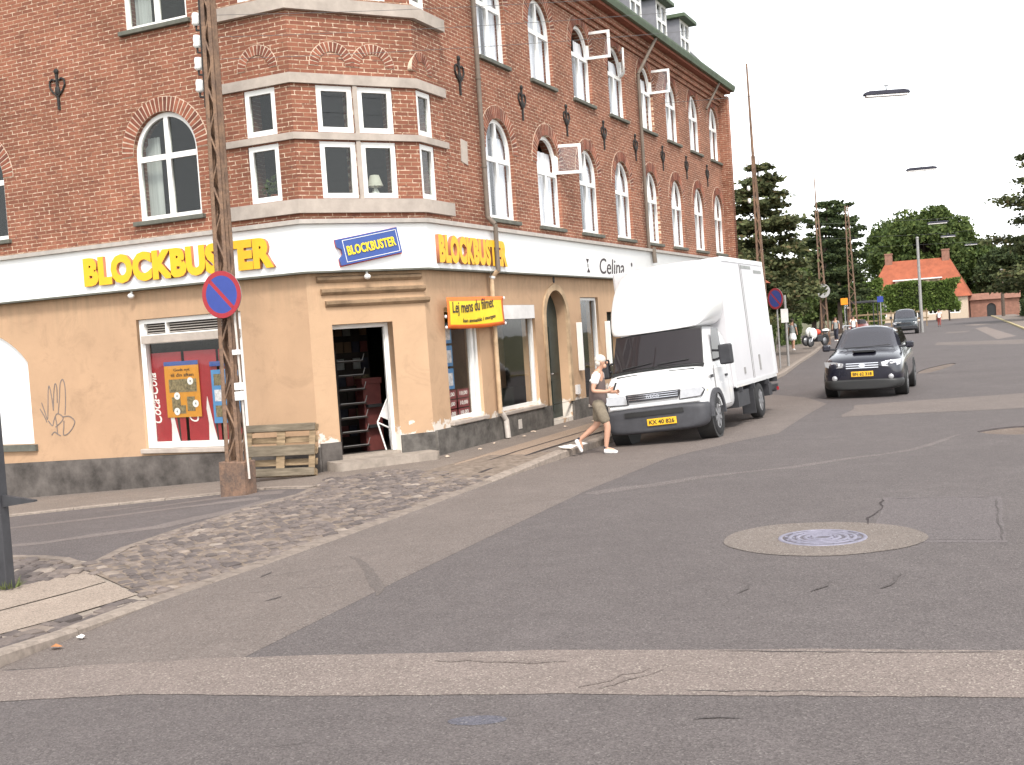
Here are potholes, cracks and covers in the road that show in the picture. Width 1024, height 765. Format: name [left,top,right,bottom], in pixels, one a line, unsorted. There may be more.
manhole cover [778,529,868,546]
crack [921,496,1004,539]
